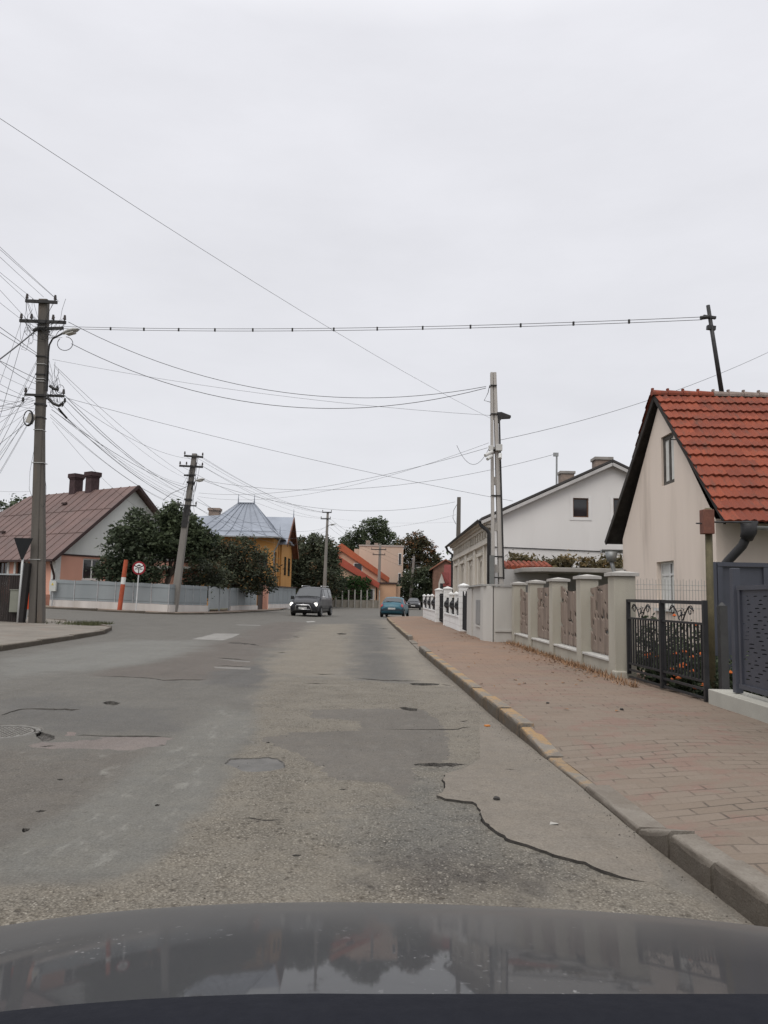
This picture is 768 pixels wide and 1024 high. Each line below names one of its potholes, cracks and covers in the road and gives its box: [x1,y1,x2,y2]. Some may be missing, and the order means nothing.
crack [436,775,645,882]
pothole [35,731,55,742]
pothole [225,757,285,772]
manhole cover [0,724,44,738]
